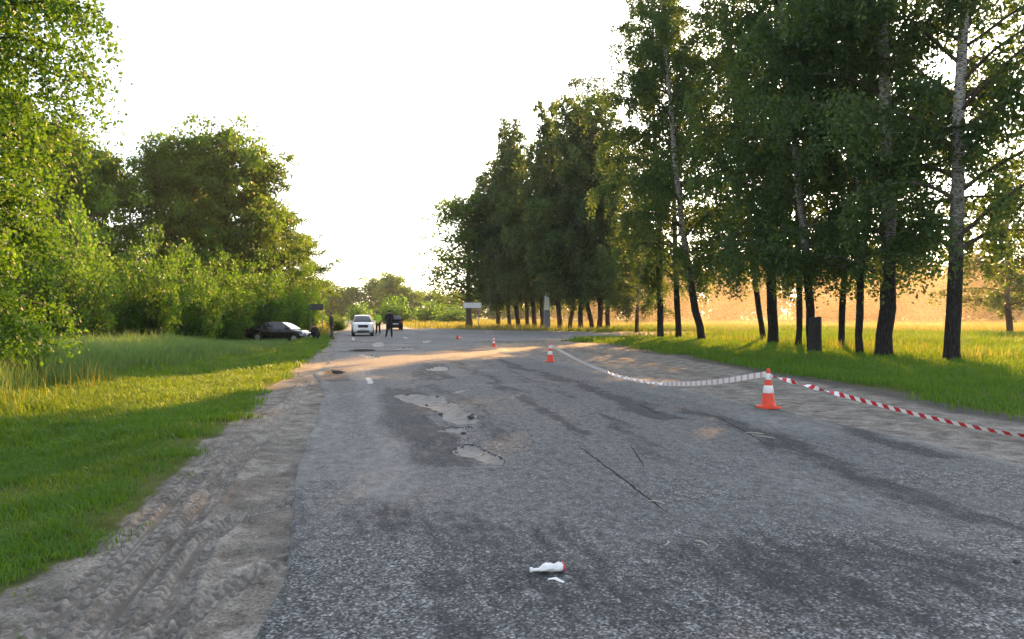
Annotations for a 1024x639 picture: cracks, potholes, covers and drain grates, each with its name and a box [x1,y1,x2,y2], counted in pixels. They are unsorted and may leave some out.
pothole [393,394,481,425]
crack [580,446,669,513]
pothole [436,426,472,434]
pothole [449,444,505,465]
